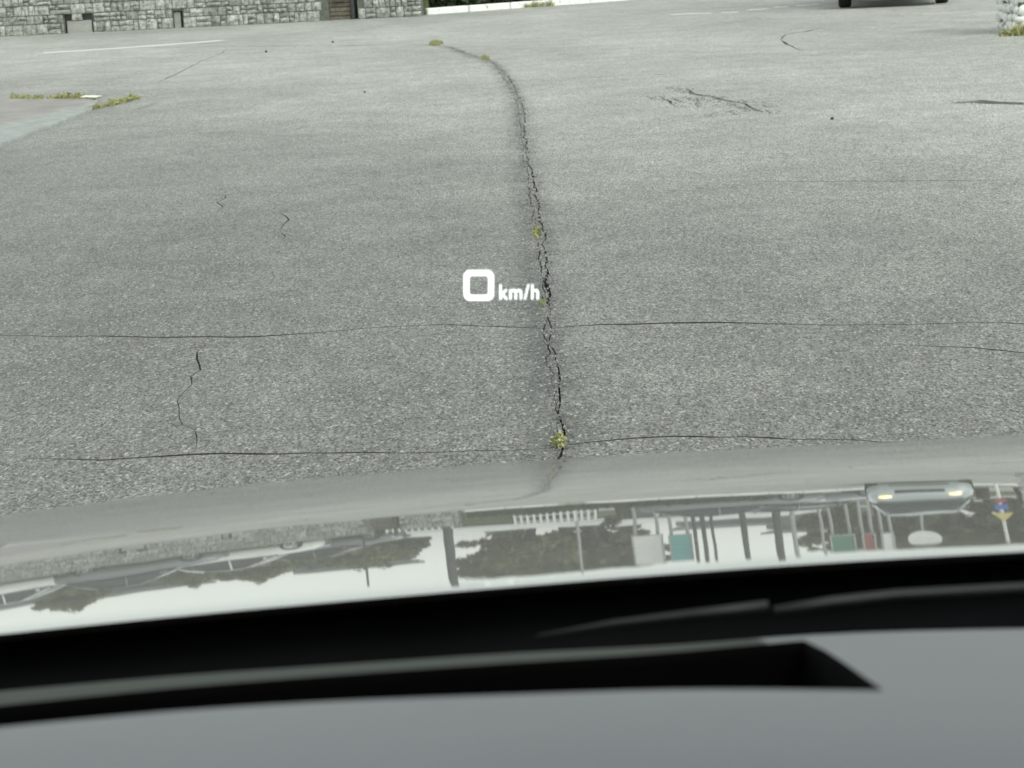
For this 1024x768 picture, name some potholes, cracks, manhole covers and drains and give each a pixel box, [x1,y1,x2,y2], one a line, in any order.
crack [0,46,1024,461]
crack [781,28,820,56]
